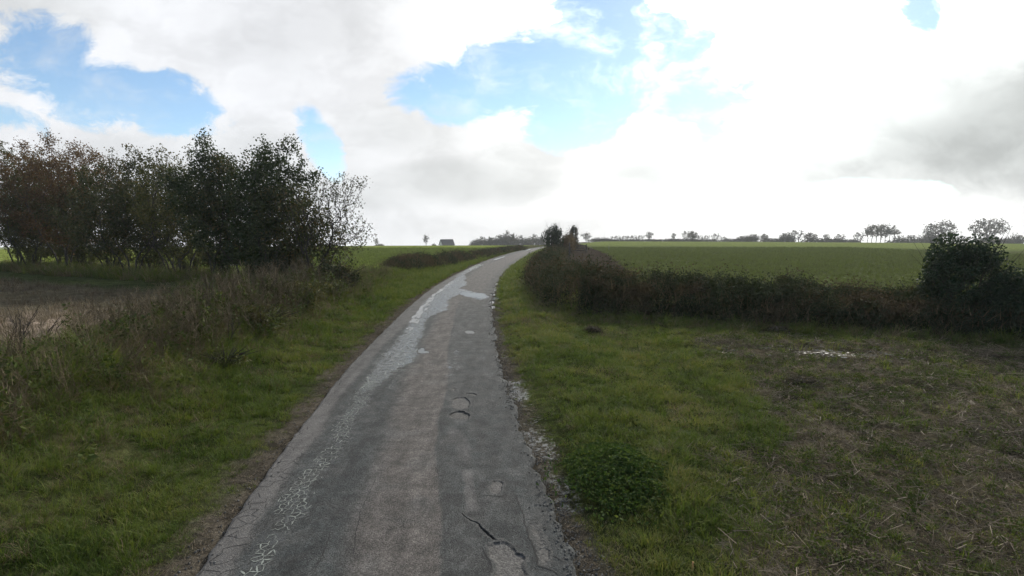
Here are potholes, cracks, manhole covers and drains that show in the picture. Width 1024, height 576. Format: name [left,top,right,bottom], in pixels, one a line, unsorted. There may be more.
pothole [449,396,472,409]
pothole [447,410,471,420]
crack [198,313,436,576]
crack [458,486,563,574]
pothole [487,478,506,495]
